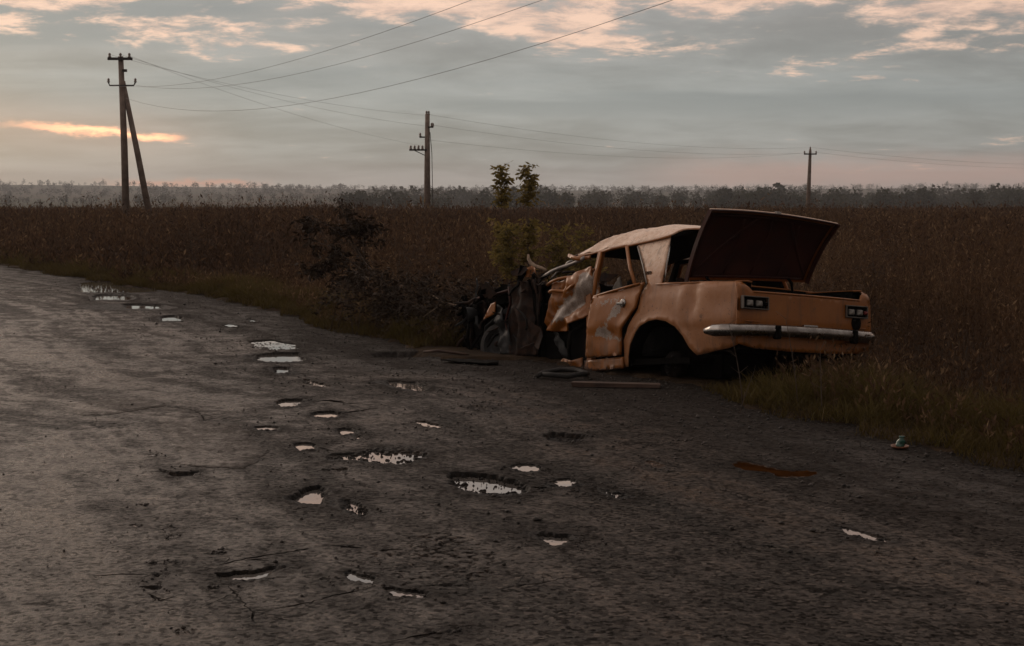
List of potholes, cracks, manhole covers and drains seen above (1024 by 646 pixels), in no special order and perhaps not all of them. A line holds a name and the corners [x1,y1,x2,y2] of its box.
pothole [508,462,542,472]
pothole [273,398,316,408]
pothole [522,531,576,546]
crack [202,532,599,623]
pothole [540,477,585,488]
pothole [326,498,371,518]
pothole [281,485,333,506]
pothole [543,432,589,442]
pothole [834,527,897,542]
pothole [305,410,343,419]
pothole [343,570,383,585]
pothole [214,563,291,582]
